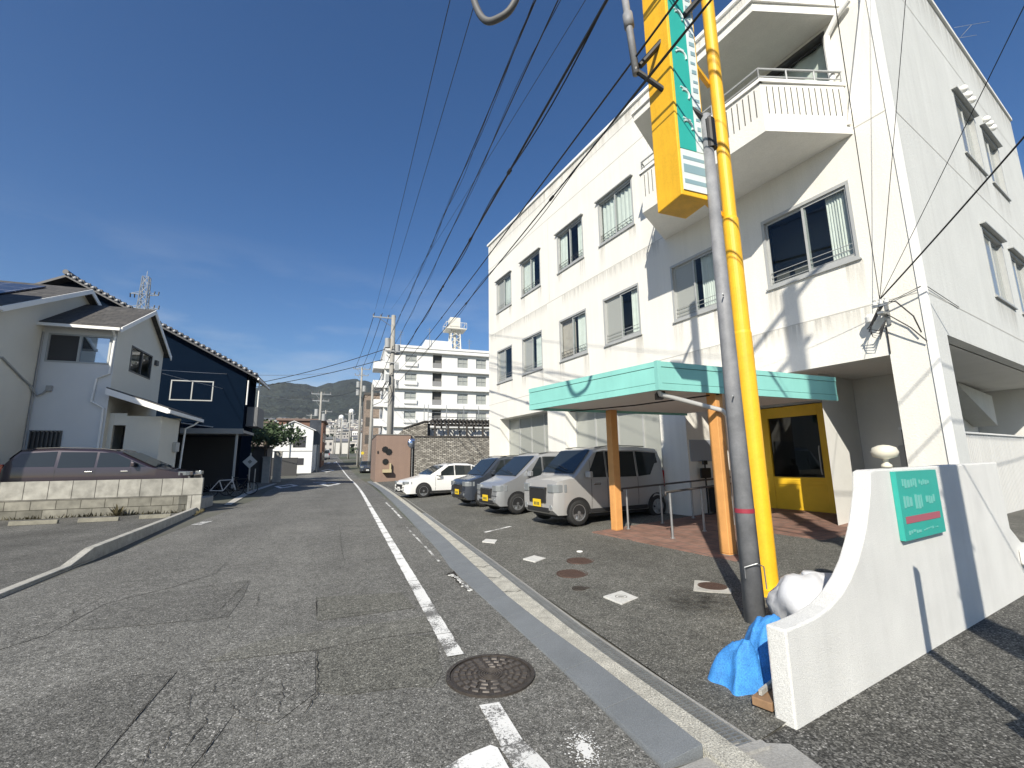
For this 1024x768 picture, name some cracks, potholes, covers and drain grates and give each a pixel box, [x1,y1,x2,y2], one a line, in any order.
crack [99,671,256,766]
crack [277,645,336,714]
manhole cover [556,569,588,578]
manhole cover [446,654,535,698]
manhole cover [693,580,731,594]
